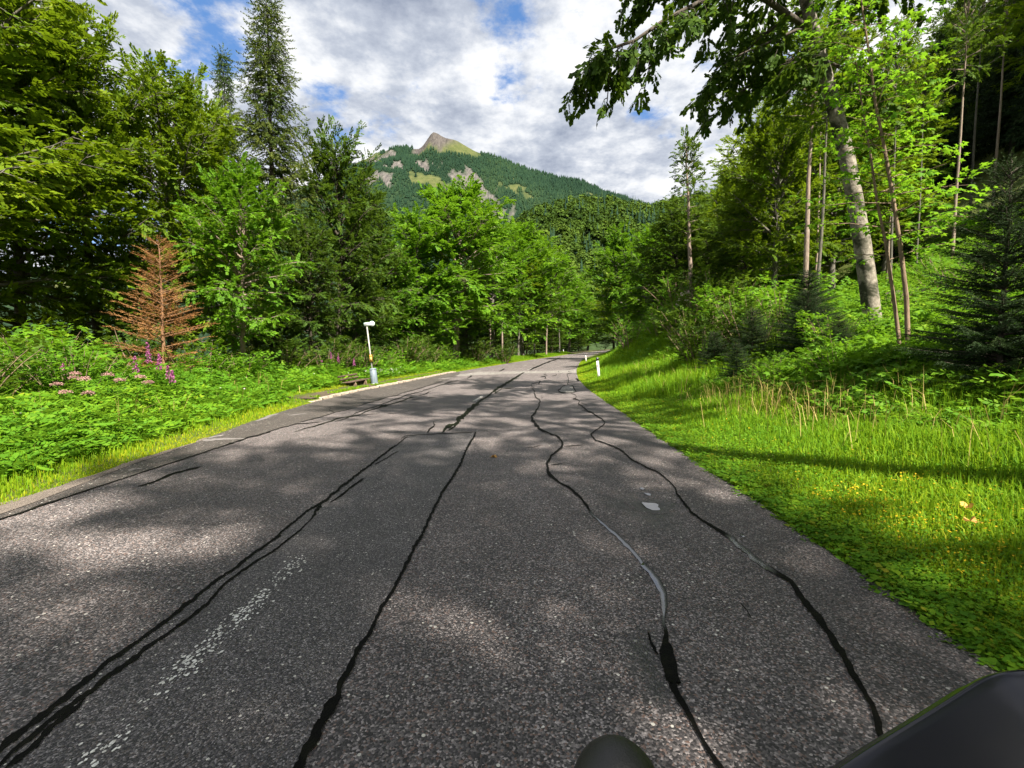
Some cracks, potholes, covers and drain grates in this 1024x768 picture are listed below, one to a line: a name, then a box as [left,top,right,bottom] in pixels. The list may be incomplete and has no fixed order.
crack [0,368,884,768]
